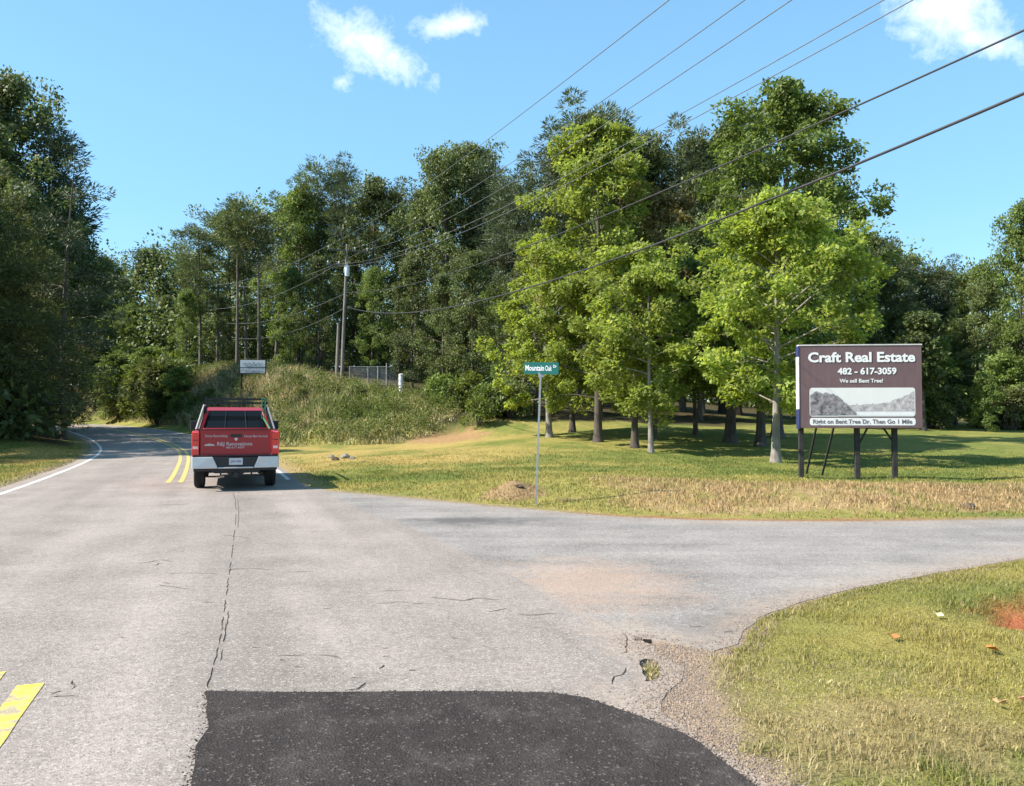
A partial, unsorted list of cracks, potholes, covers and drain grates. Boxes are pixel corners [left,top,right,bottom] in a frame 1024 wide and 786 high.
crack [608,623,628,684]
crack [348,648,388,690]
crack [51,681,79,697]
crack [378,590,499,604]
crack [137,493,274,688]
pothole [639,658,661,682]
